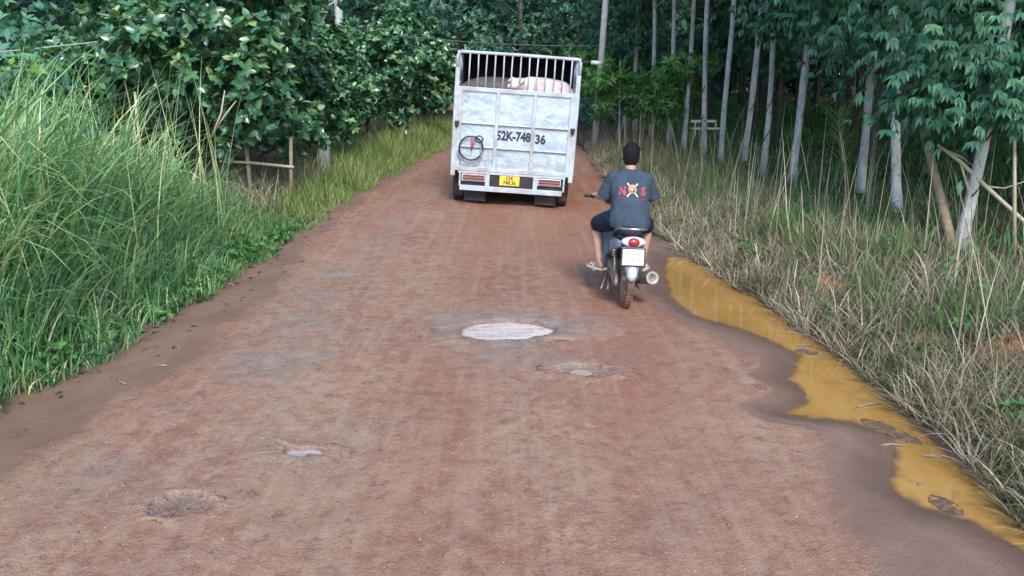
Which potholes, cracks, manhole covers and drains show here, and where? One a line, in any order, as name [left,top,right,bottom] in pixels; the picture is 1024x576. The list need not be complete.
pothole [116,481,230,527]
pothole [411,311,630,356]
pothole [530,356,650,384]
